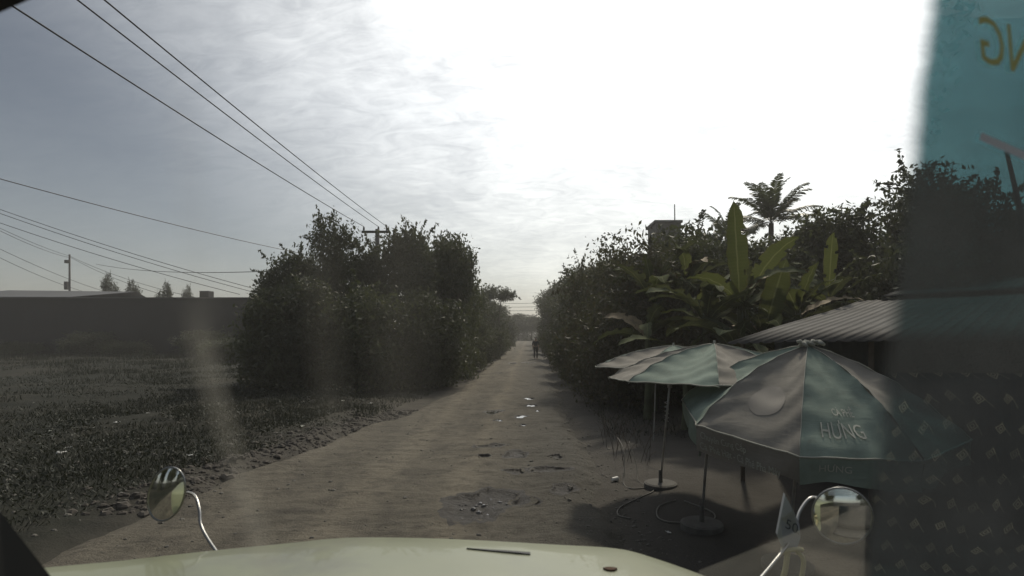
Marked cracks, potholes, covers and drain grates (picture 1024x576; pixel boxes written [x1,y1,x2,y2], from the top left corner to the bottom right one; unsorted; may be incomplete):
pothole [521,465,580,473]
pothole [498,467,534,476]
pothole [500,448,532,459]
pothole [507,496,546,508]
pothole [546,482,583,497]
pothole [429,484,538,531]
